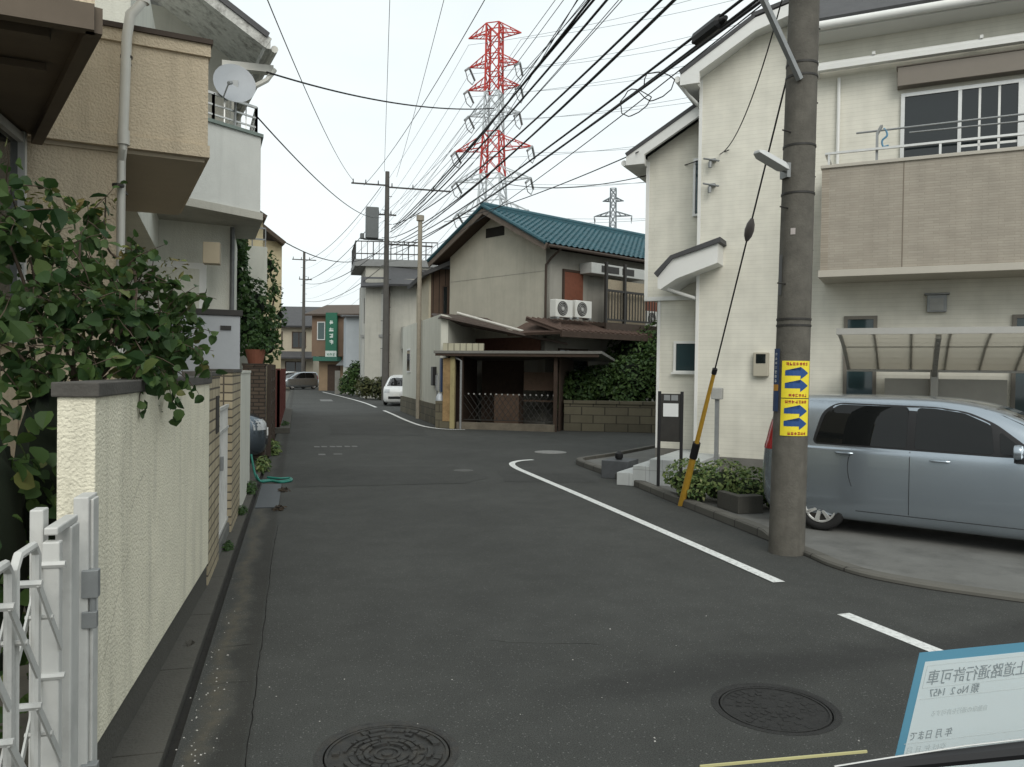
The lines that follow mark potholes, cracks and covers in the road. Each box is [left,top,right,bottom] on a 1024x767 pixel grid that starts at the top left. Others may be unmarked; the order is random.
manhole cover [711,683,842,736]
manhole cover [313,721,459,767]
